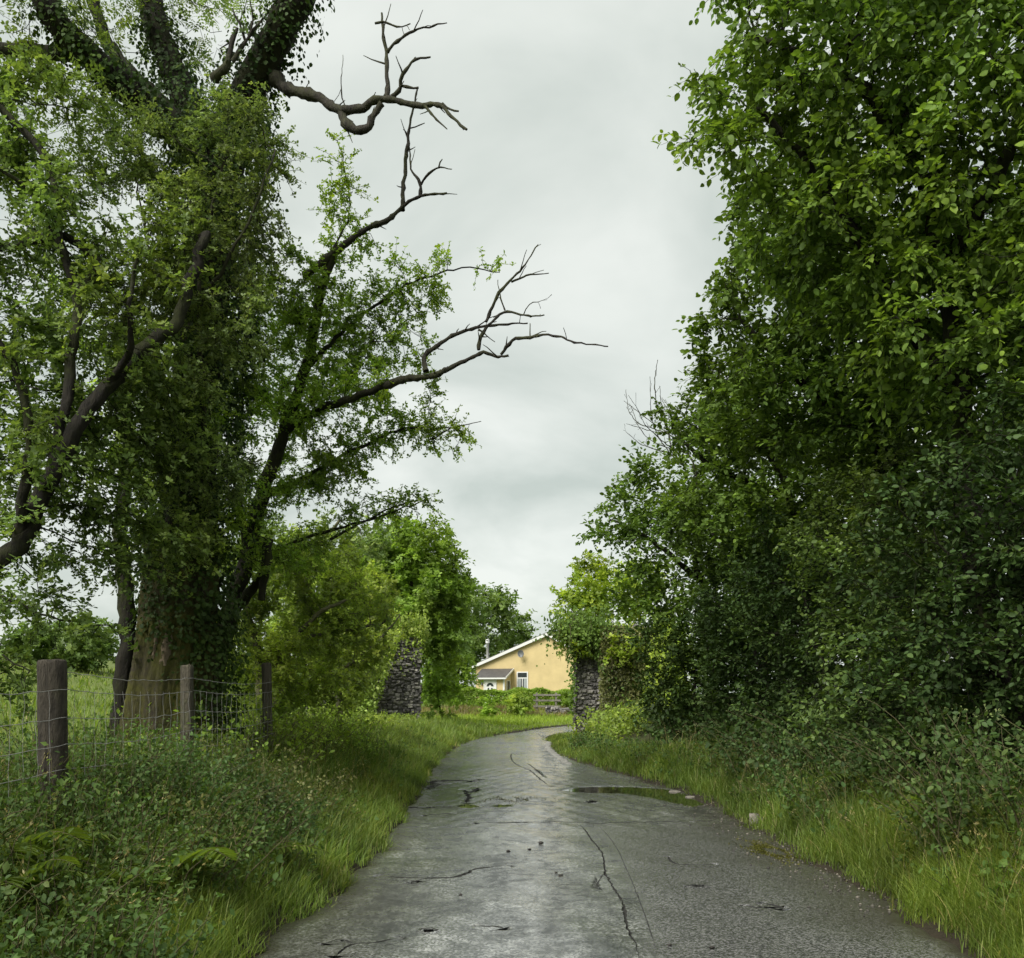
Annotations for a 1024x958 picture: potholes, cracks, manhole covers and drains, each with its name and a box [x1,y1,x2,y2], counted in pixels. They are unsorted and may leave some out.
crack [315,935,407,958]
crack [372,864,511,884]
crack [409,753,556,816]
crack [737,901,788,911]
crack [561,822,719,958]
